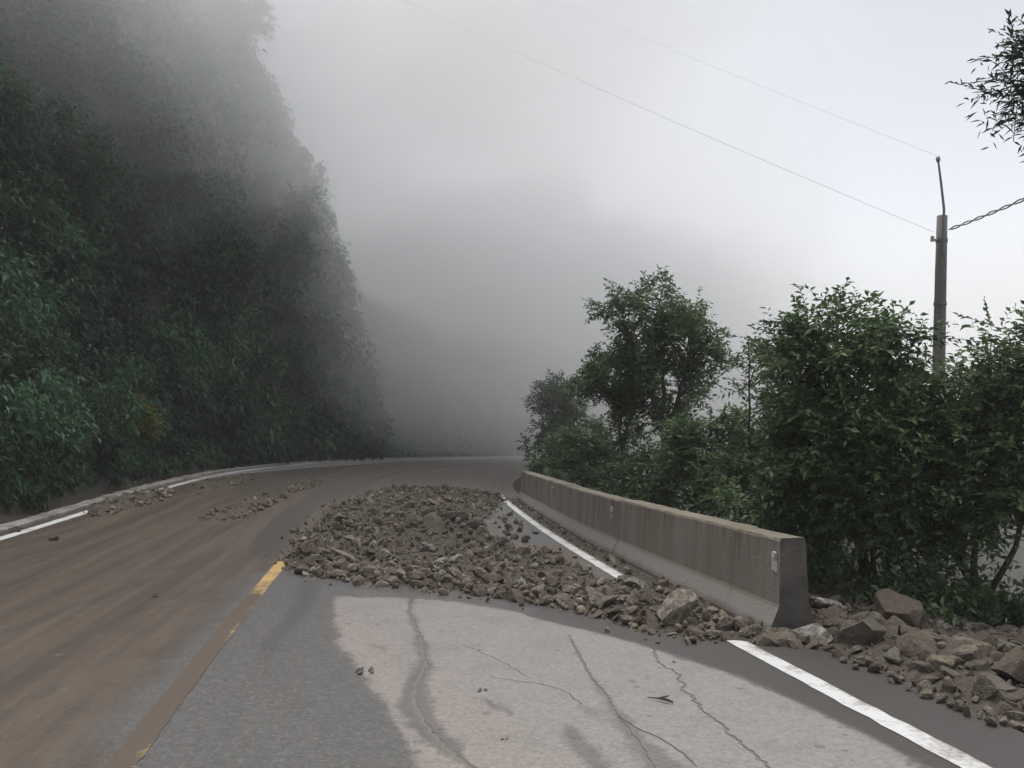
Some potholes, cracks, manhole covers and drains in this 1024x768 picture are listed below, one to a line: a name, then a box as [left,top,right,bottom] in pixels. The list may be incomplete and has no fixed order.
crack [406,600,771,768]
